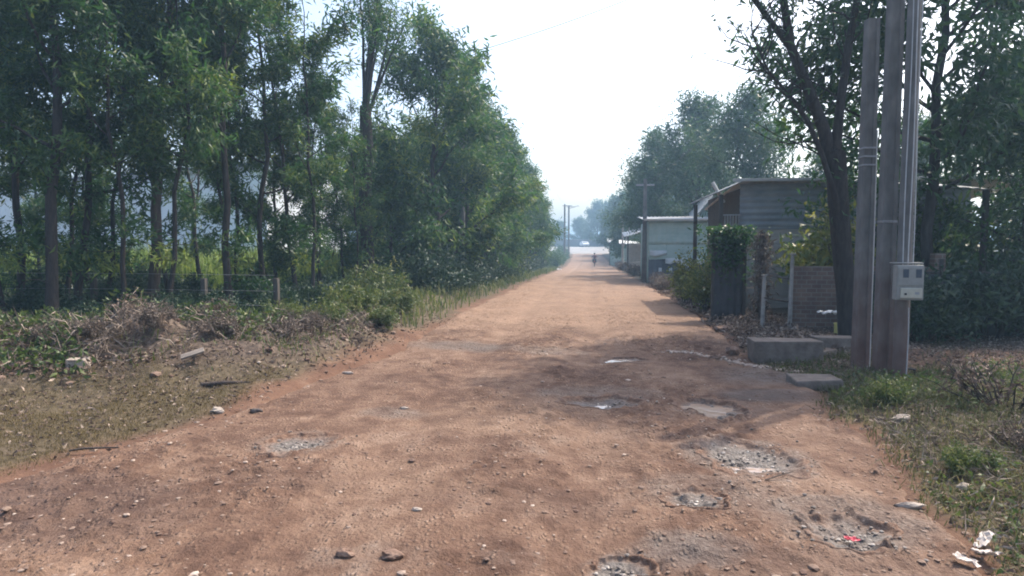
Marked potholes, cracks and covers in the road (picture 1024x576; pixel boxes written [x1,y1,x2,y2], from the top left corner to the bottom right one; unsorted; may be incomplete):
pothole [671,394,753,423]
pothole [641,484,737,510]
pothole [548,393,658,411]
pothole [769,505,929,562]
pothole [602,356,654,364]
pothole [665,428,825,496]
pothole [250,431,358,458]
pothole [581,553,661,576]
